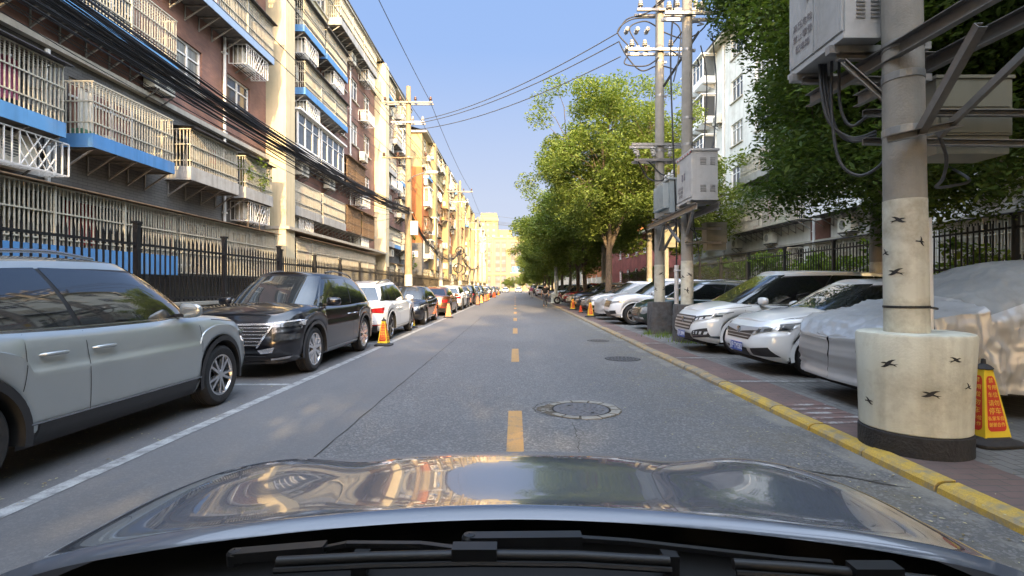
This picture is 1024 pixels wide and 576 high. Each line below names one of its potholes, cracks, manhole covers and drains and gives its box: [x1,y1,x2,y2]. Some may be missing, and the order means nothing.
manhole cover [536,400,622,420]
crack [807,470,911,488]
